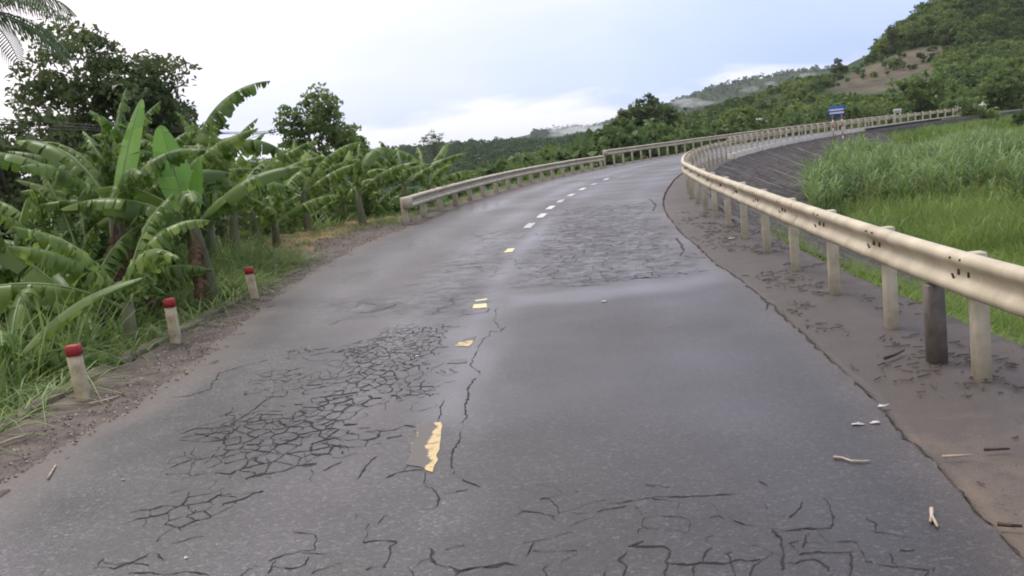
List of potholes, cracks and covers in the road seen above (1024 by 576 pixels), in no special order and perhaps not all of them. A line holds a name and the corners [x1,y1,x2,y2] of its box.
crack [40,315,936,576]
crack [518,178,1021,557]
